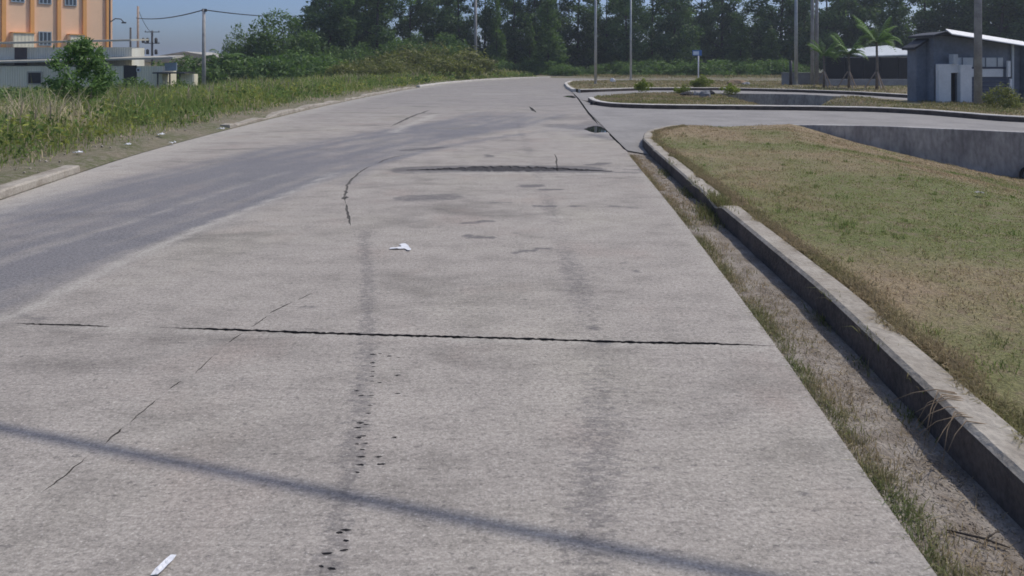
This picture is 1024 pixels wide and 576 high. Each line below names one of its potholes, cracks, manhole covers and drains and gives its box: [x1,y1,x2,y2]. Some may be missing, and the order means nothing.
crack [341,155,402,225]
crack [42,292,314,492]
